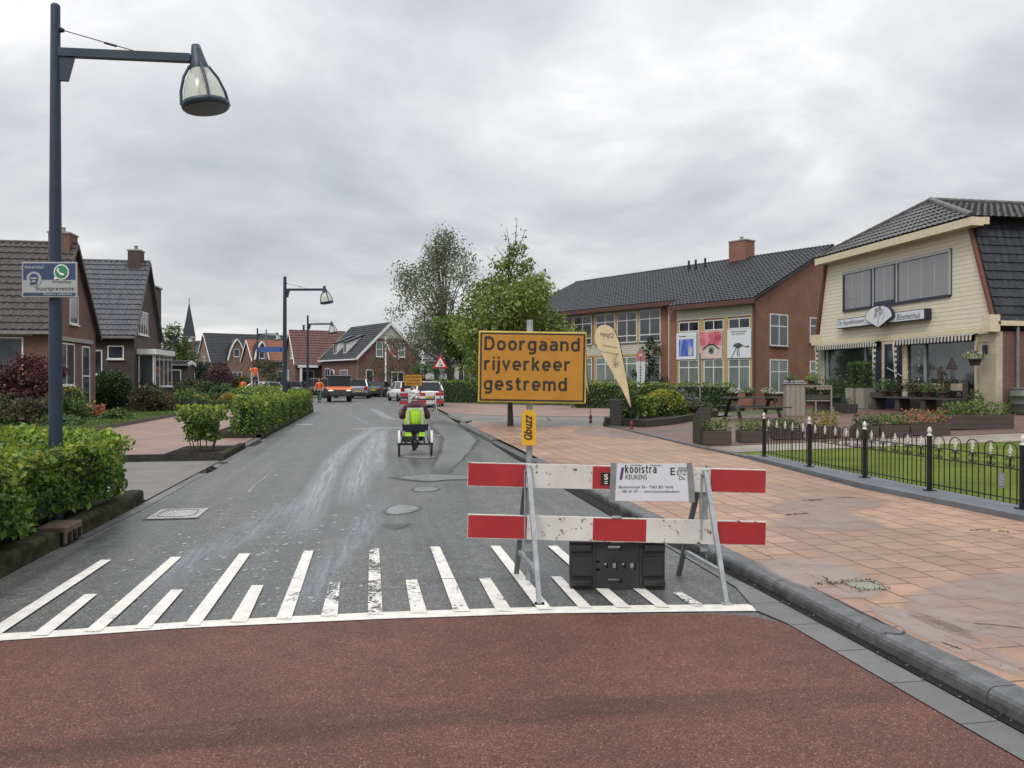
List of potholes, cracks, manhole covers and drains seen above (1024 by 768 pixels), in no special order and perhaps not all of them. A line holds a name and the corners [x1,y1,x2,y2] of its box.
manhole cover [142,508,209,520]
